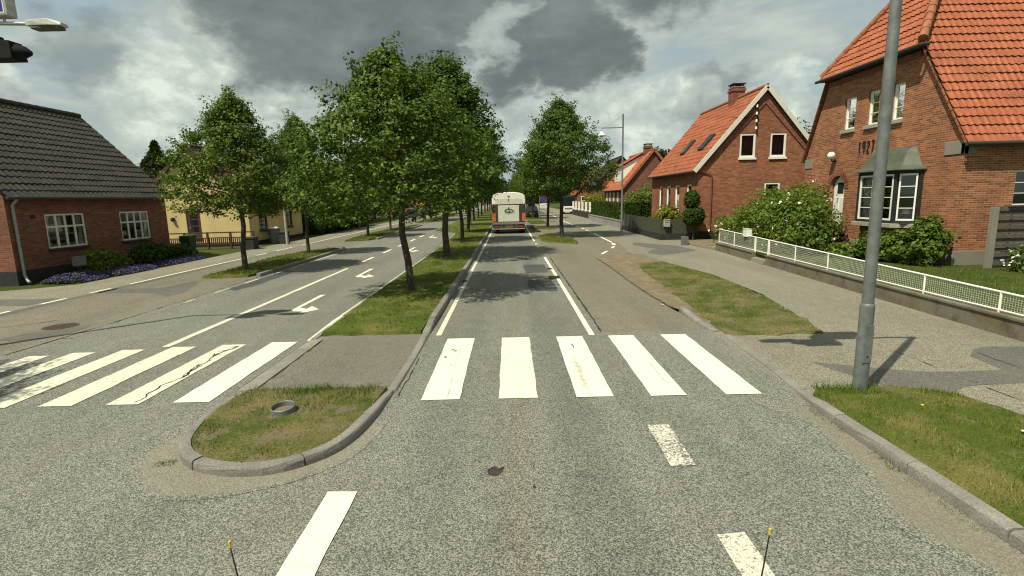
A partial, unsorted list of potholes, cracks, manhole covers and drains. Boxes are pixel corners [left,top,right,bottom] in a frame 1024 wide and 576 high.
crack [134,346,239,403]
pothole [487,466,504,476]
